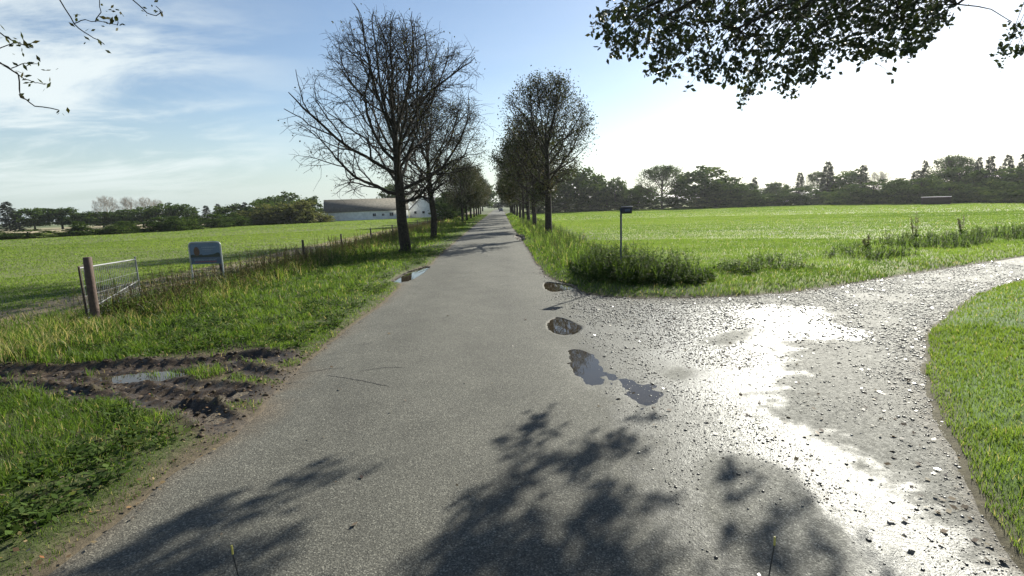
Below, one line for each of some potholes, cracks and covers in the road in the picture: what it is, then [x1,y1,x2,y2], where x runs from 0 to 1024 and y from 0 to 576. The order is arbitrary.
pothole [538,281,576,293]
pothole [538,316,590,338]
